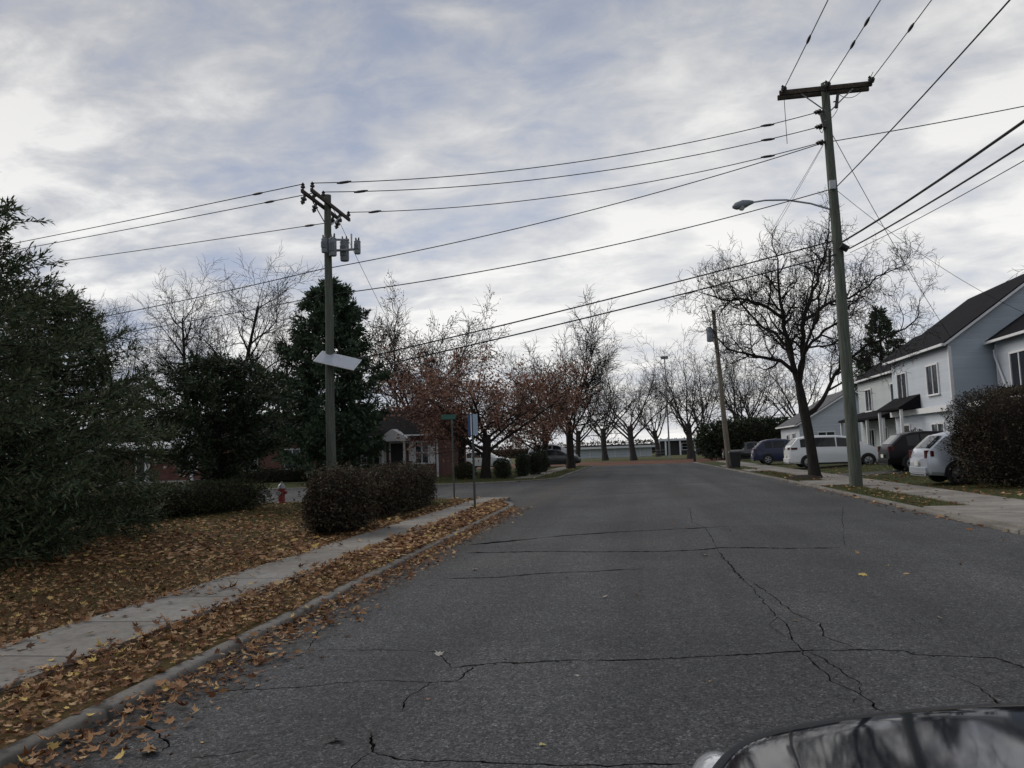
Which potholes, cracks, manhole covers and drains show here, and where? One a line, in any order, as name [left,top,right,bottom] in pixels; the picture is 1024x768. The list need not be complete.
crack [351,733,694,768]
crack [215,512,1024,712]
